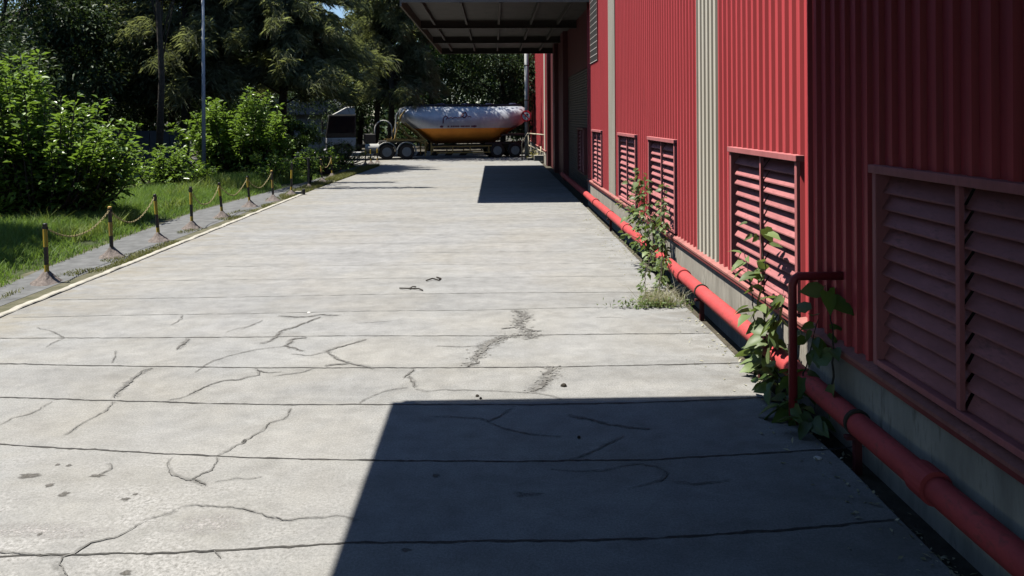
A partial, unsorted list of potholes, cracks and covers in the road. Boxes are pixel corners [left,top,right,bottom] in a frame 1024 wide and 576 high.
crack [571,415,650,459]
crack [358,309,563,436]
crack [170,316,372,400]
crack [64,353,150,435]
crack [0,504,359,576]
crack [166,456,260,485]
